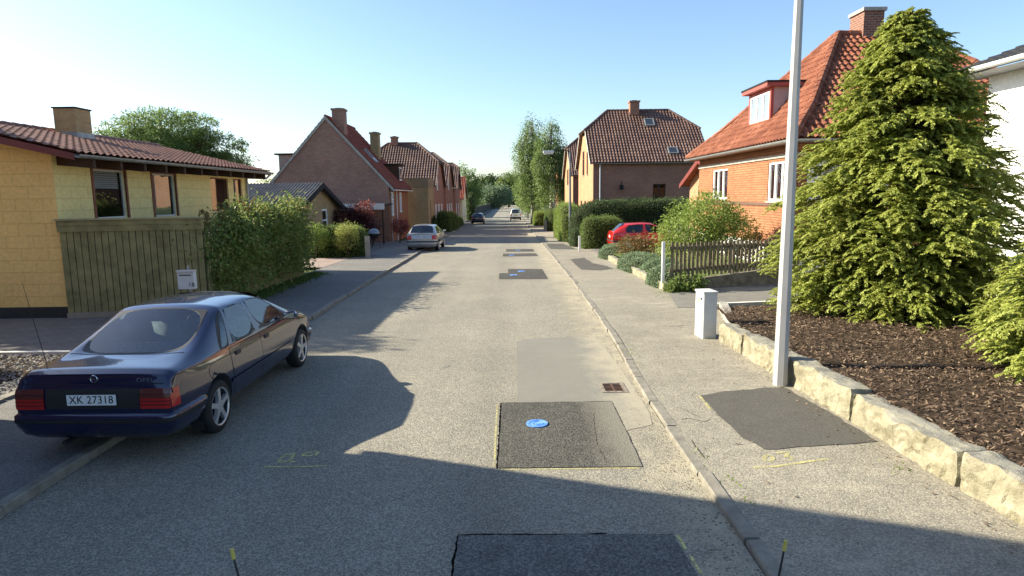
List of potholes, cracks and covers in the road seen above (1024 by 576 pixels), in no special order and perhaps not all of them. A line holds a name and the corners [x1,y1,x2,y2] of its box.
crack [496,401,601,469]
drain grate [598,382,628,393]
